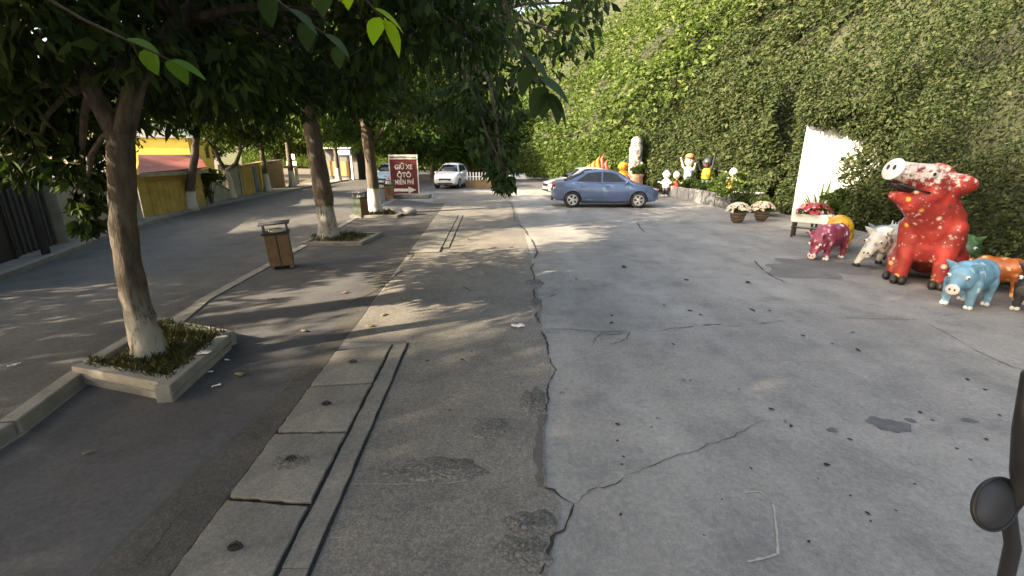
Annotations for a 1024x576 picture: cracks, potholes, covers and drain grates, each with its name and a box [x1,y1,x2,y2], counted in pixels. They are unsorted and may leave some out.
crack [540,420,764,575]
pothole [271,454,310,471]
crack [572,329,631,345]
